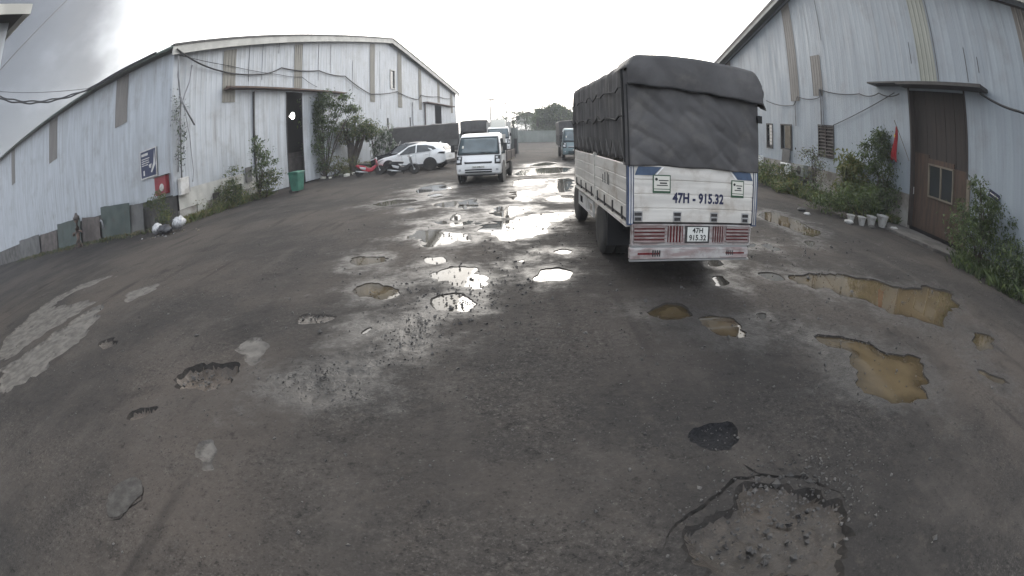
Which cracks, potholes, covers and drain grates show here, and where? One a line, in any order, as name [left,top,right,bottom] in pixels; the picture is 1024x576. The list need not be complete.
pothole [788,273,962,328]
pothole [430,292,478,309]
pothole [126,406,158,421]
pothole [173,362,240,392]
pothole [681,481,856,576]
pothole [295,313,337,324]
pothole [814,334,929,402]
